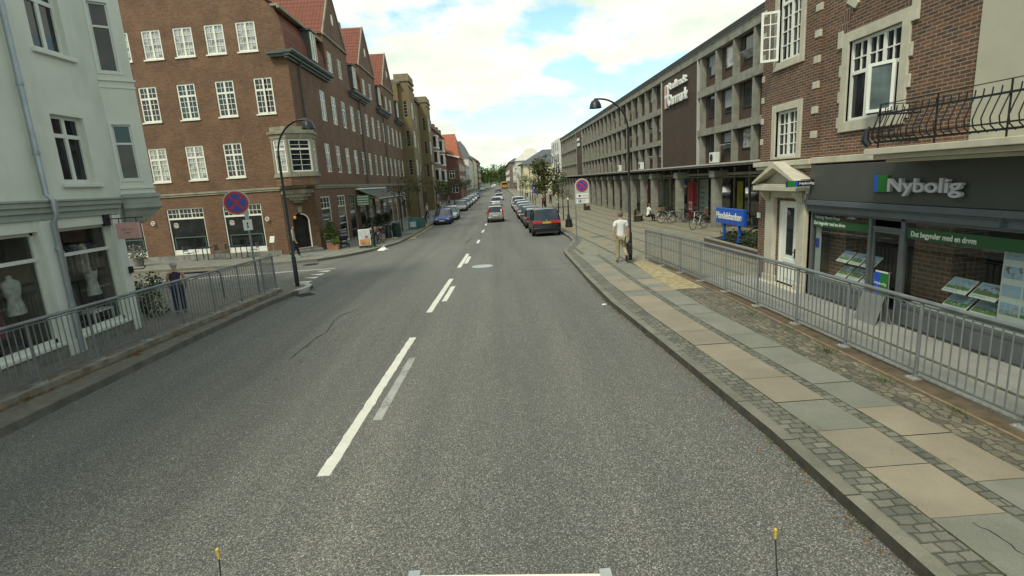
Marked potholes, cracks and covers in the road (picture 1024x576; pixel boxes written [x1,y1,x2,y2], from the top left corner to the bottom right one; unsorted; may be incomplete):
crack [290,311,352,359]
